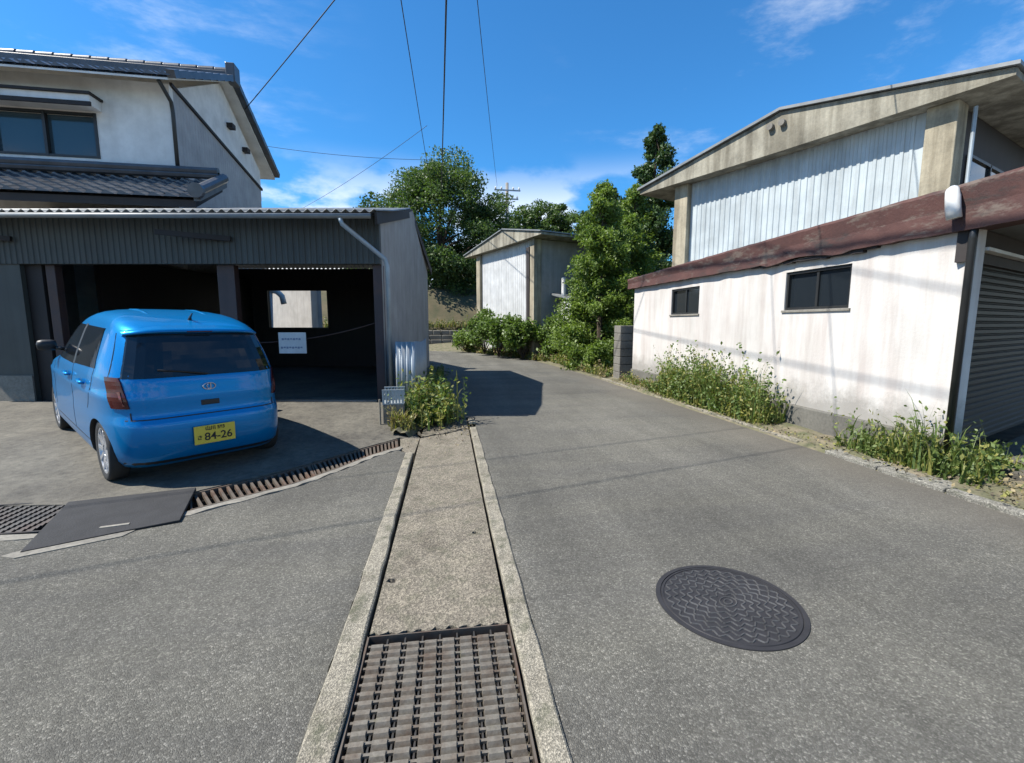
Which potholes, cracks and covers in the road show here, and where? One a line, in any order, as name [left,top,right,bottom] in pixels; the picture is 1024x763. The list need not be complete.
drain grate [0,503,64,535]
manhole cover [656,565,811,652]
drain grate [336,623,538,763]
drain grate [190,464,315,510]
drain grate [311,439,398,476]
